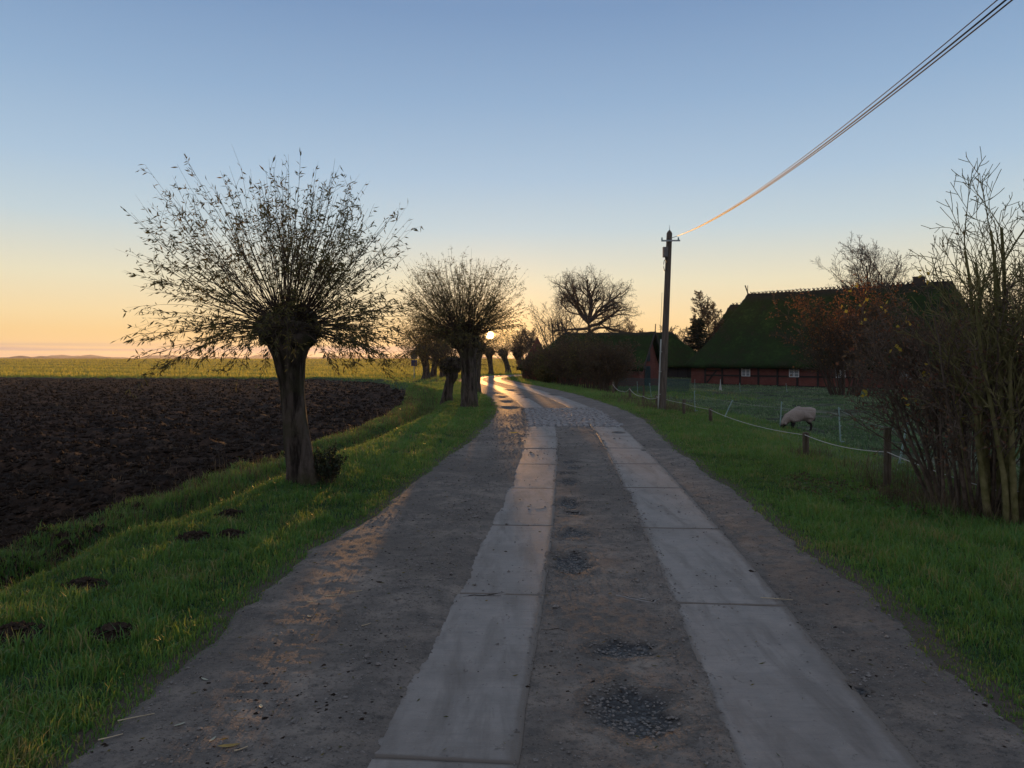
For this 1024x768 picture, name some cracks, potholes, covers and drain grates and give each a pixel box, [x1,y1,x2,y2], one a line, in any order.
pothole [553,496,588,512]
pothole [570,669,710,759]
pothole [543,546,602,582]
pothole [577,632,678,664]
